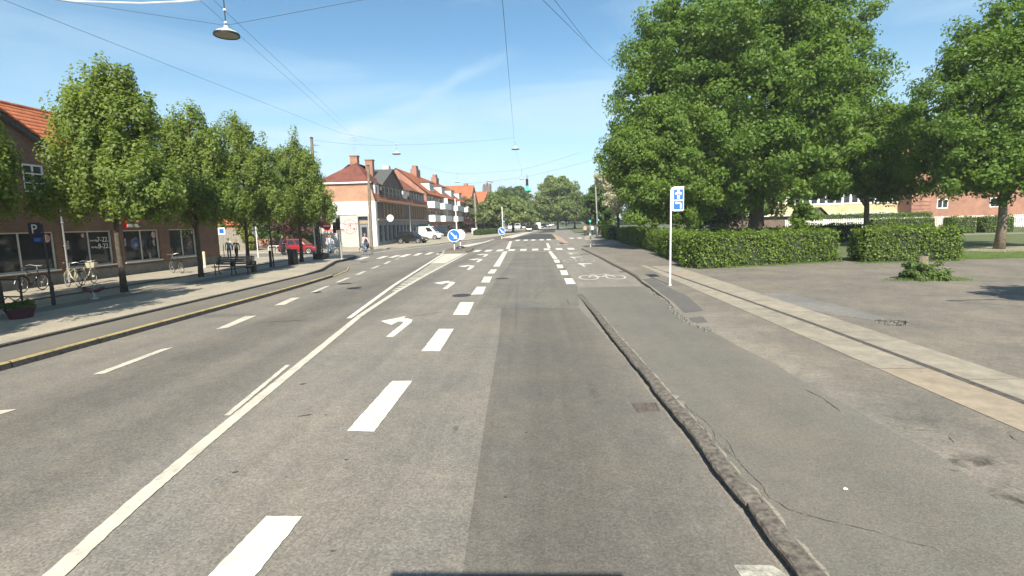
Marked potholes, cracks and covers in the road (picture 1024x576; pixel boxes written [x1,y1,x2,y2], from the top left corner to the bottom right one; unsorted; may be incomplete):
pothole [874,319,908,327]
crack [673,397,938,550]
